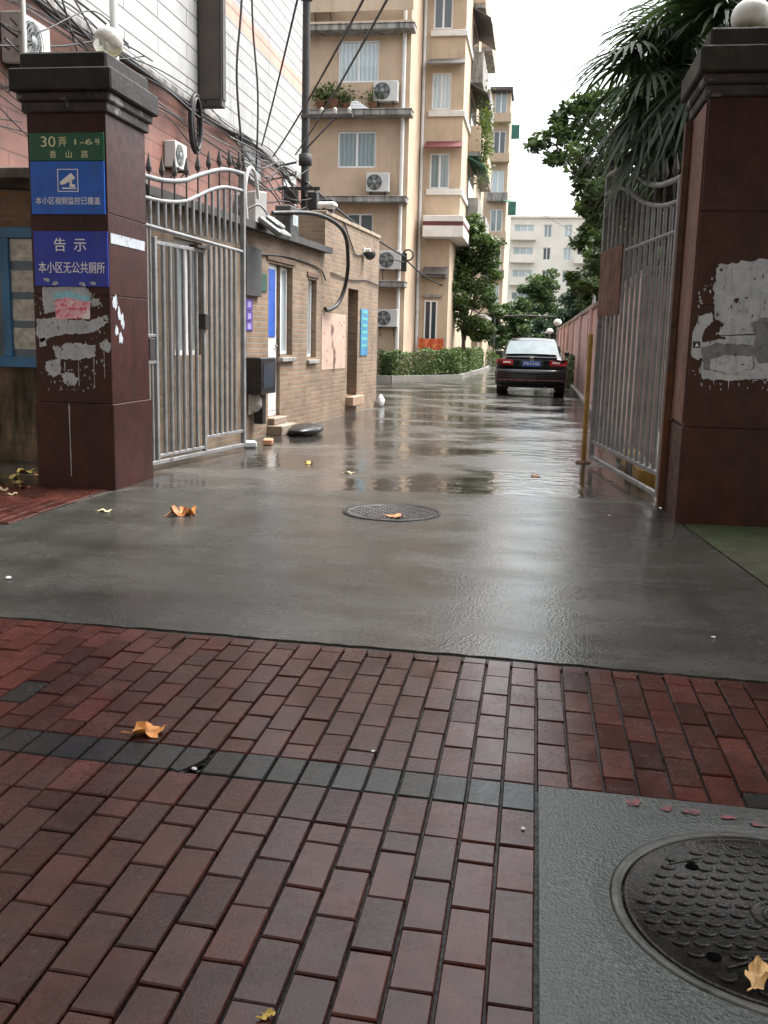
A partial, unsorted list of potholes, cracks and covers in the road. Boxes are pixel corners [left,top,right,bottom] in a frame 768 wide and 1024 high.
manhole cover [610,832,768,1016]
manhole cover [343,503,441,522]
